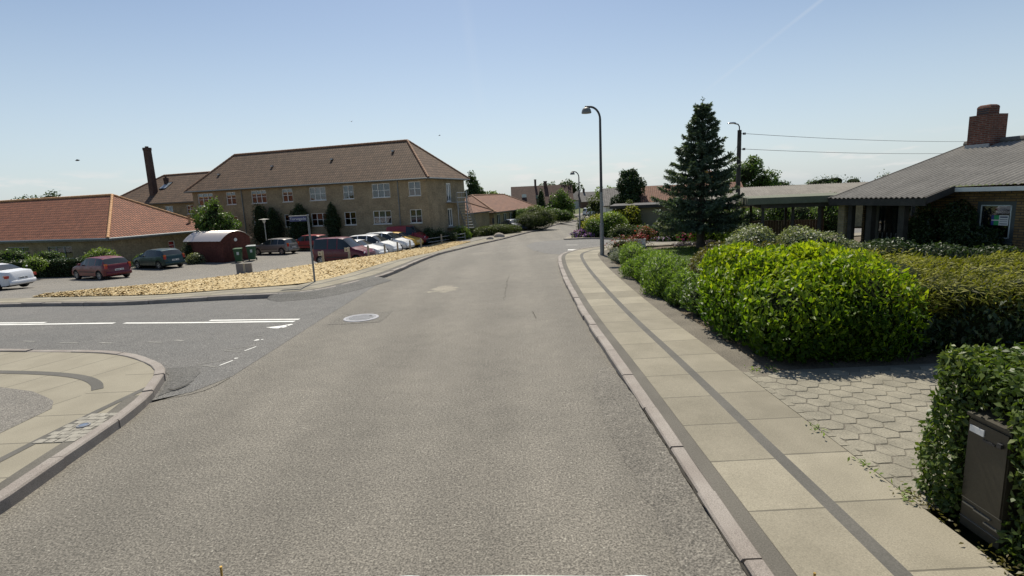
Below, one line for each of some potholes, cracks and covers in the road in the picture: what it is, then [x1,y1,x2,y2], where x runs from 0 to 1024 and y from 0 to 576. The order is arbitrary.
manhole cover [343,314,379,322]
